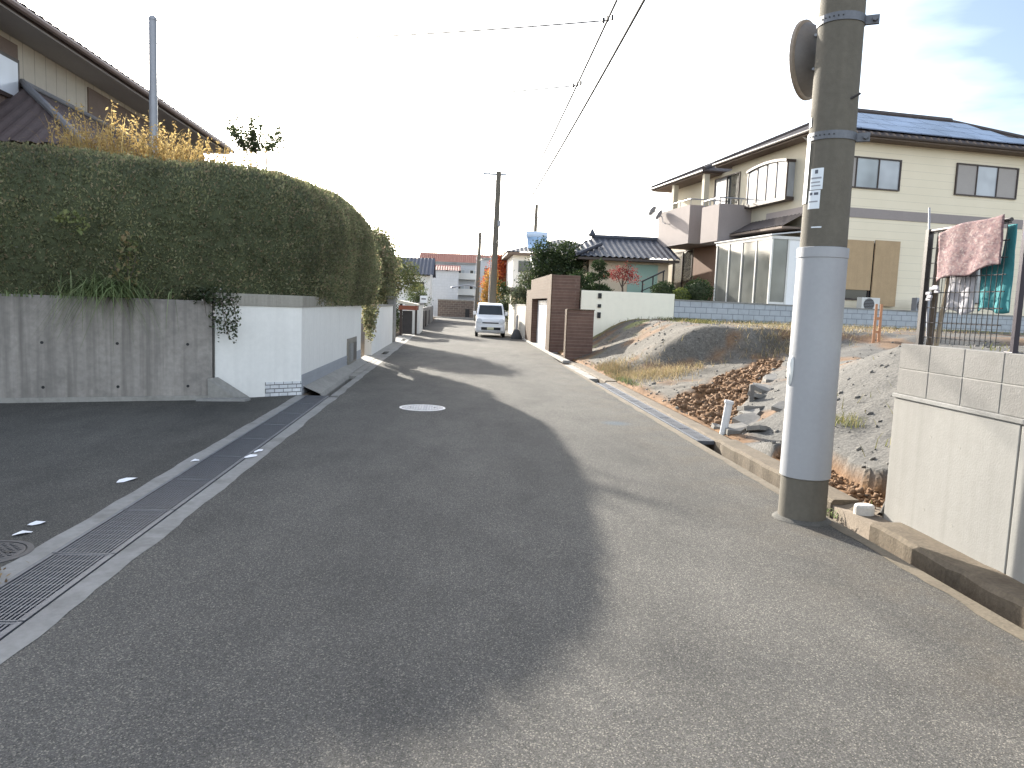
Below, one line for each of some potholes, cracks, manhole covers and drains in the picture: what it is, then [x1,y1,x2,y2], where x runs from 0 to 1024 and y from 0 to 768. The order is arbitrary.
drain grate [210,438,271,457]
drain grate [640,408,669,418]
drain grate [237,424,290,439]
drain grate [173,455,246,480]
drain grate [280,403,319,413]
drain grate [675,428,714,445]
drain grate [0,553,115,624]
manhole cover [0,540,35,563]
drain grate [656,417,689,428]
drain grate [52,509,174,555]
drain grate [260,412,306,425]
drain grate [123,478,216,511]
